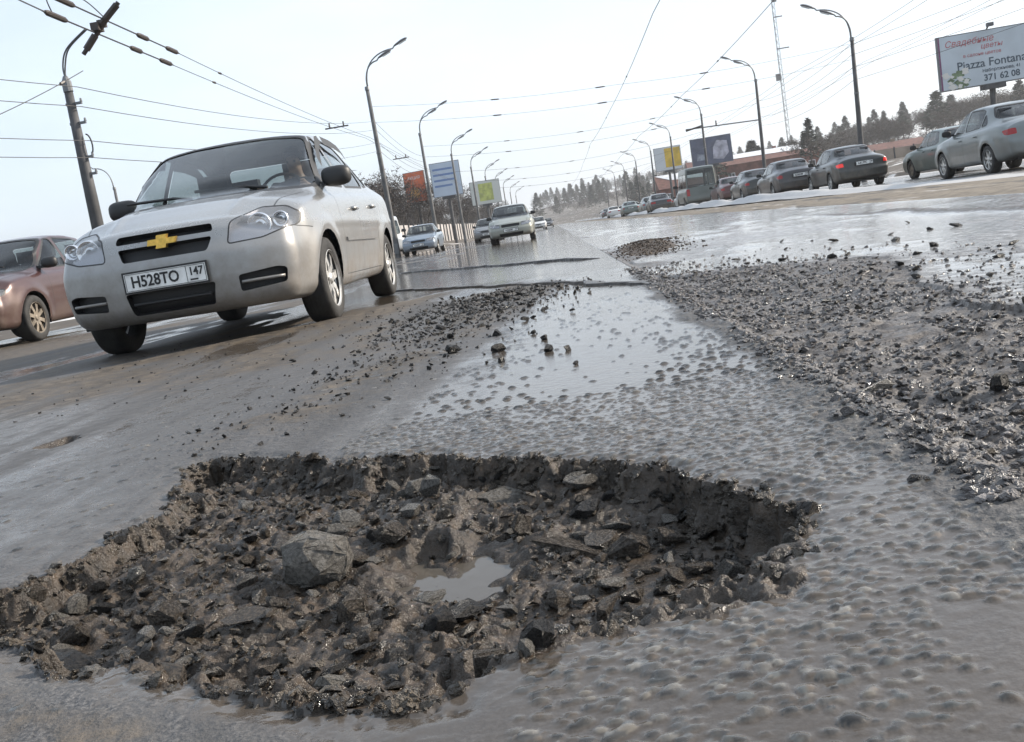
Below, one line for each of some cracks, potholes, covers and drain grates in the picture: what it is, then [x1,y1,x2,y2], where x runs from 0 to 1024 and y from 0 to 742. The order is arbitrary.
pothole [0,453,813,718]
pothole [31,435,82,450]
